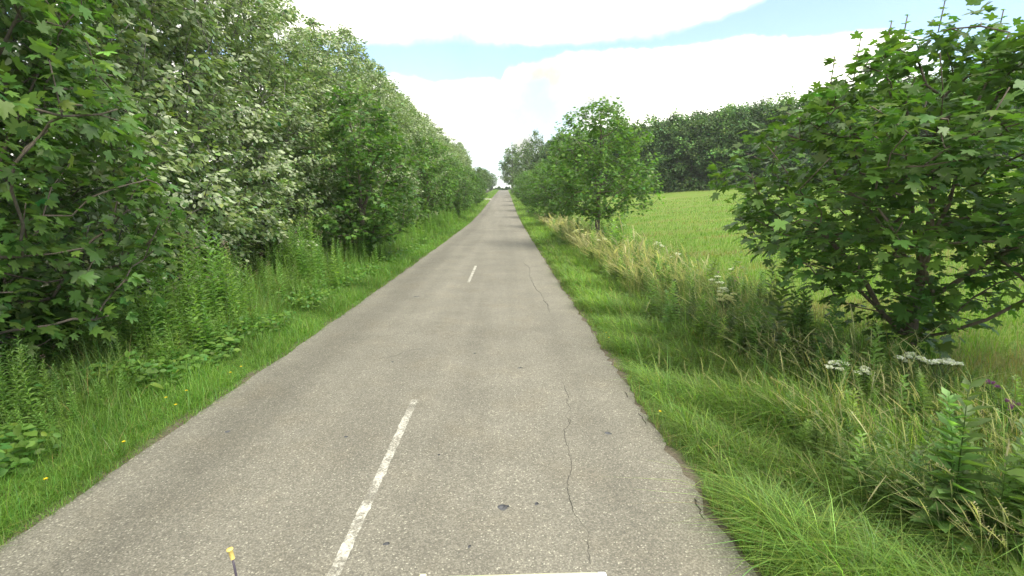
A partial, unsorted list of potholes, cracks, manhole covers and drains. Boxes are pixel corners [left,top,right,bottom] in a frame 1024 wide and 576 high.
crack [564,387,591,564]
